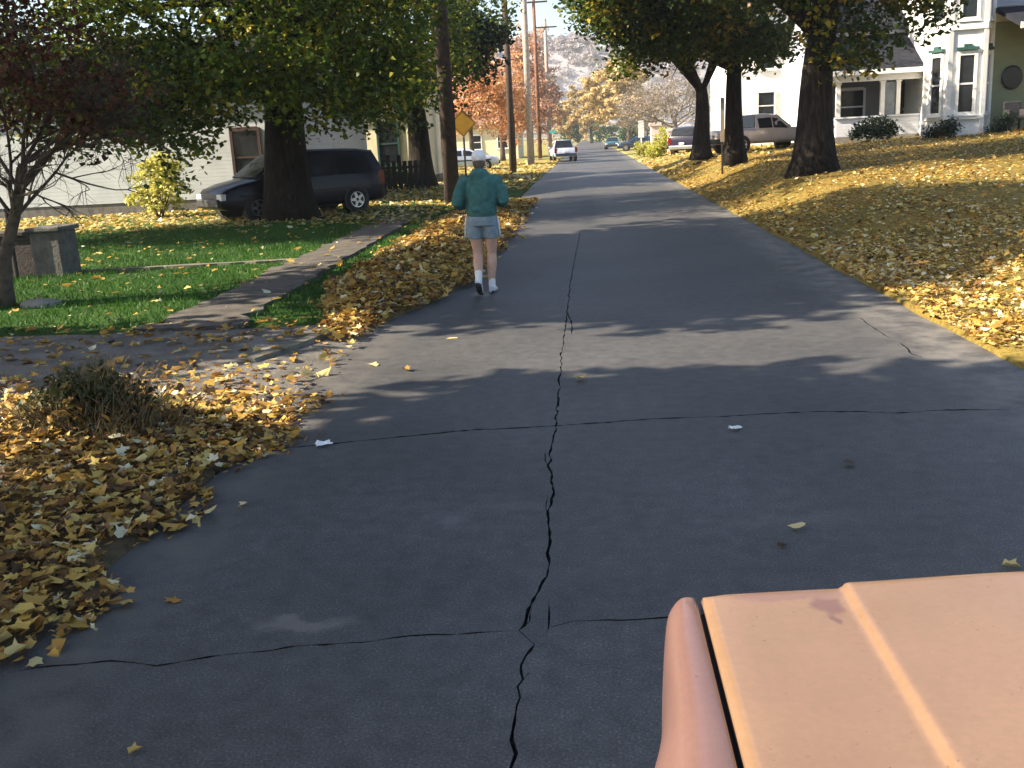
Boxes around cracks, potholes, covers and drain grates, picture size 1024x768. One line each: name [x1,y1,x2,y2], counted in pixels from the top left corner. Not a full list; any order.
crack [20,231,1008,768]
